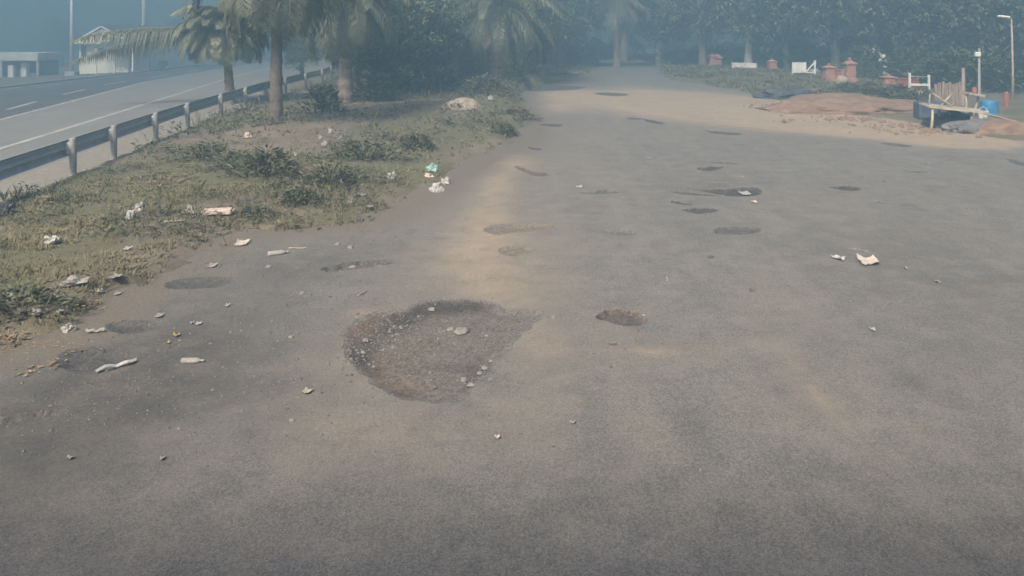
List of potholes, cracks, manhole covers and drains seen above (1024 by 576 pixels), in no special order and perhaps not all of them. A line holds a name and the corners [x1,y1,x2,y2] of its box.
pothole [483,223,559,235]
pothole [684,187,763,197]
pothole [514,166,549,177]
pothole [713,226,762,235]
pothole [339,298,545,404]
pothole [498,245,533,256]
pothole [595,309,648,327]
